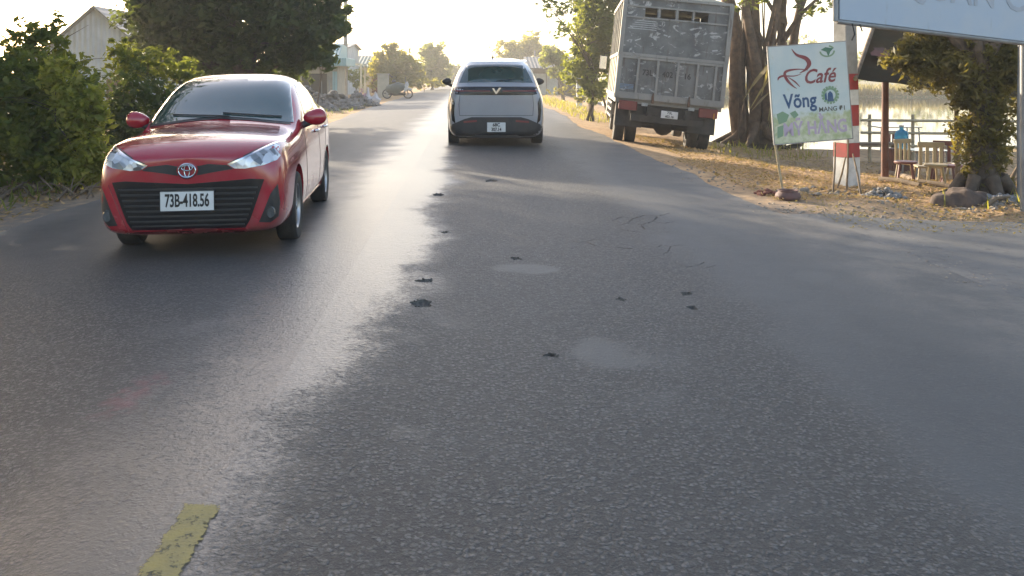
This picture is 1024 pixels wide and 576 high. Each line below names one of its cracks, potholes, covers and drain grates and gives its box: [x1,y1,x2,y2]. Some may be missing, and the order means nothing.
crack [573,213,715,268]
pothole [410,299,432,307]
